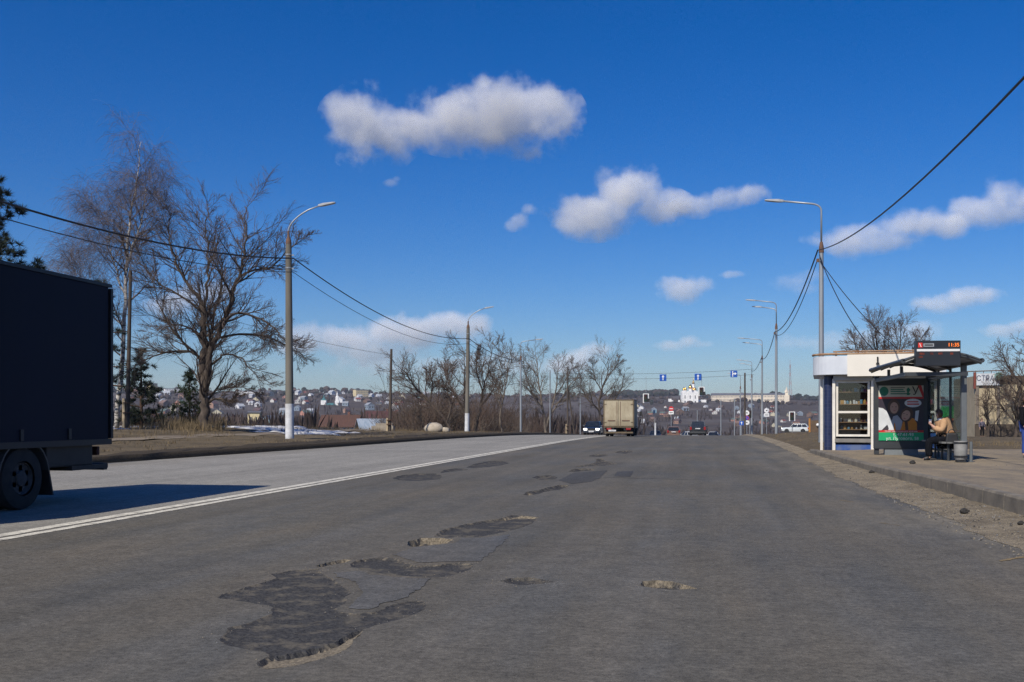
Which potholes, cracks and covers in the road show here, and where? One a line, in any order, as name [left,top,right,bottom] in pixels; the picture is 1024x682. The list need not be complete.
pothole [501,577,554,585]
pothole [435,515,539,538]
pothole [523,485,569,495]
pothole [316,559,350,568]
pothole [639,580,697,590]
pothole [218,569,426,669]
pothole [407,538,453,547]
